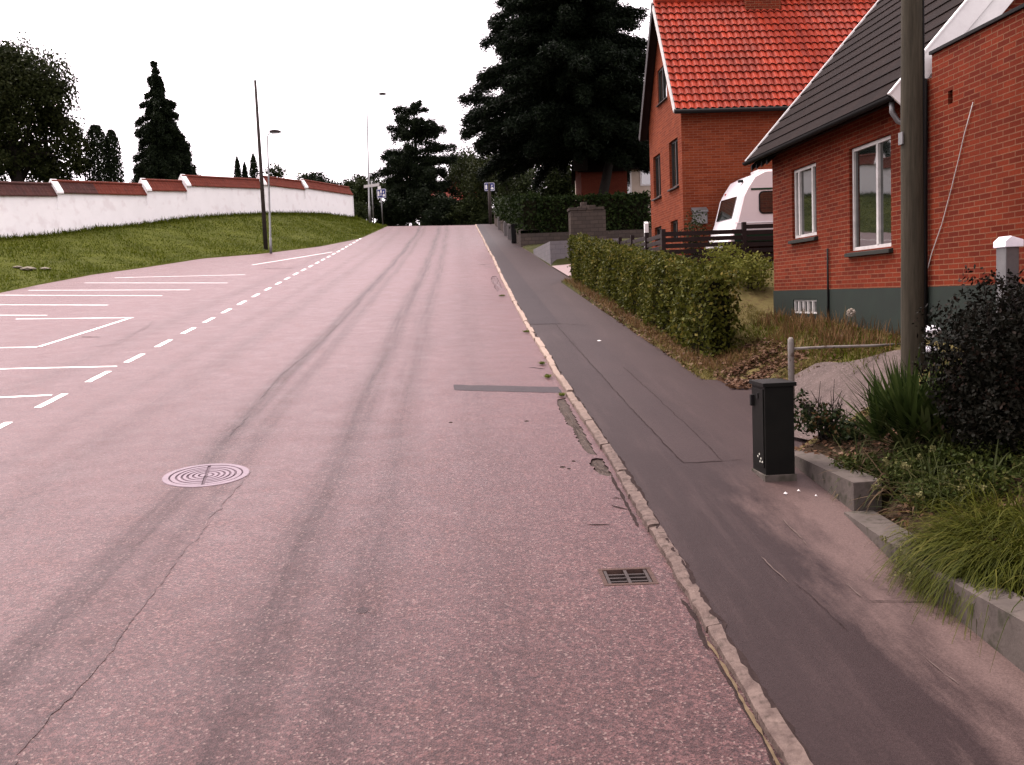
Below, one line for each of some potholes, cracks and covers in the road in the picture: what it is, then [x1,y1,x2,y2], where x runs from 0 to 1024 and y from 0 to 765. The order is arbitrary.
pothole [589,458,613,476]
crack [762,557,847,630]
pothole [557,398,597,455]
crack [11,472,250,765]
manhole cover [162,463,250,487]
drain grate [597,567,659,586]
